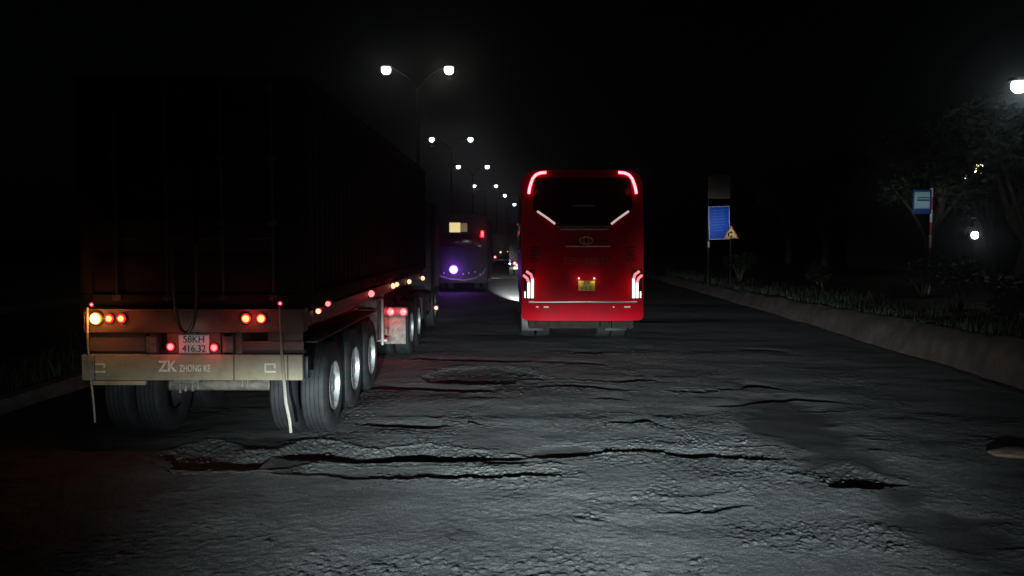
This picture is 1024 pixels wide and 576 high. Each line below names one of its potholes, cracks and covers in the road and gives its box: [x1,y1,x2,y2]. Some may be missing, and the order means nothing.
crack [254,344,905,483]
pothole [803,460,917,493]
pothole [406,365,557,386]
crack [638,487,766,519]
